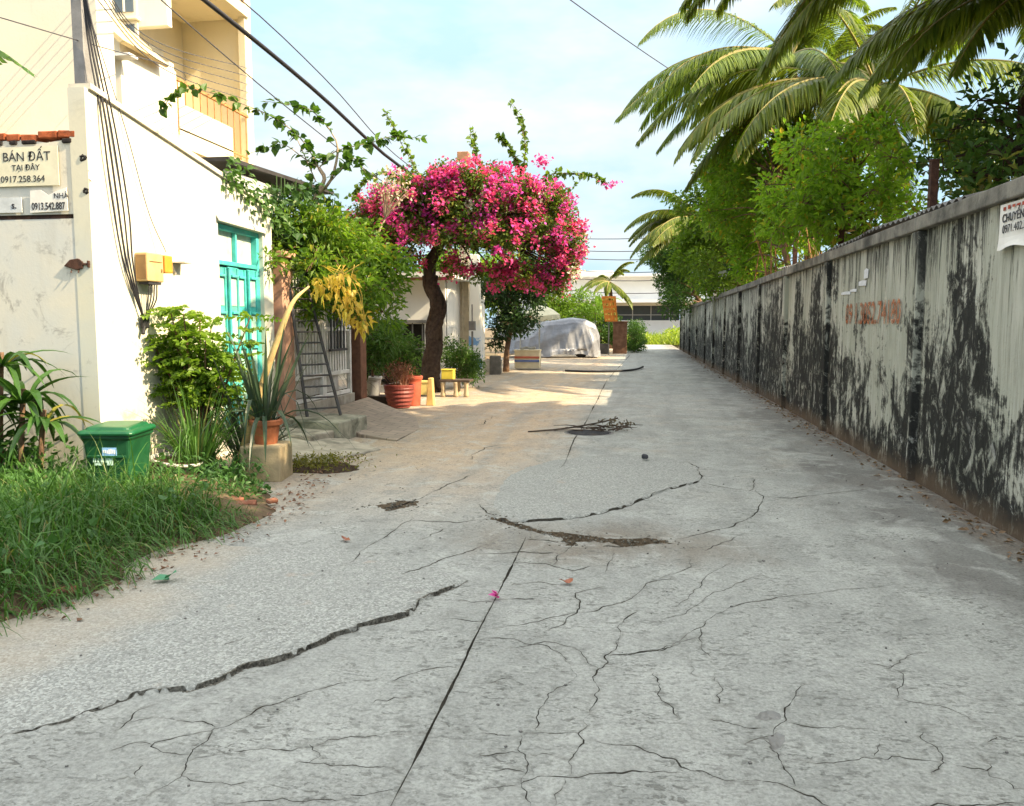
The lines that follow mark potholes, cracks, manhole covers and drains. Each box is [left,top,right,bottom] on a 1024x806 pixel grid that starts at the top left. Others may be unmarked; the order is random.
crack [480,566,1019,806]
pothole [376,500,419,511]
crack [0,446,877,804]
